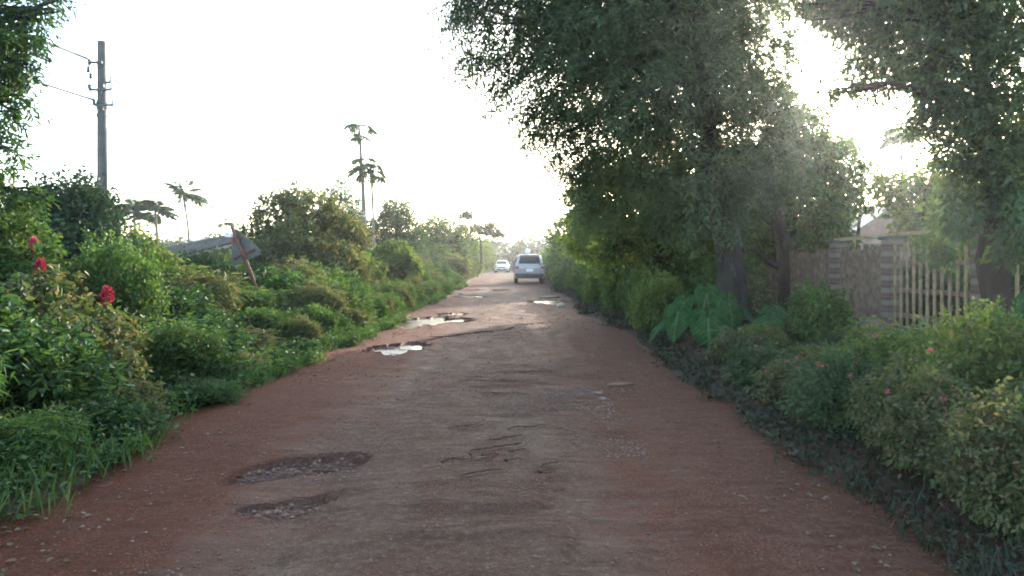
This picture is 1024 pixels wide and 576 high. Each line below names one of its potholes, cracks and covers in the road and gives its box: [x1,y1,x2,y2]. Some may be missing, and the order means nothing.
pothole [353,342,434,359]
crack [439,422,563,478]
pothole [400,315,482,330]
pothole [218,454,379,487]
pothole [233,489,349,521]
